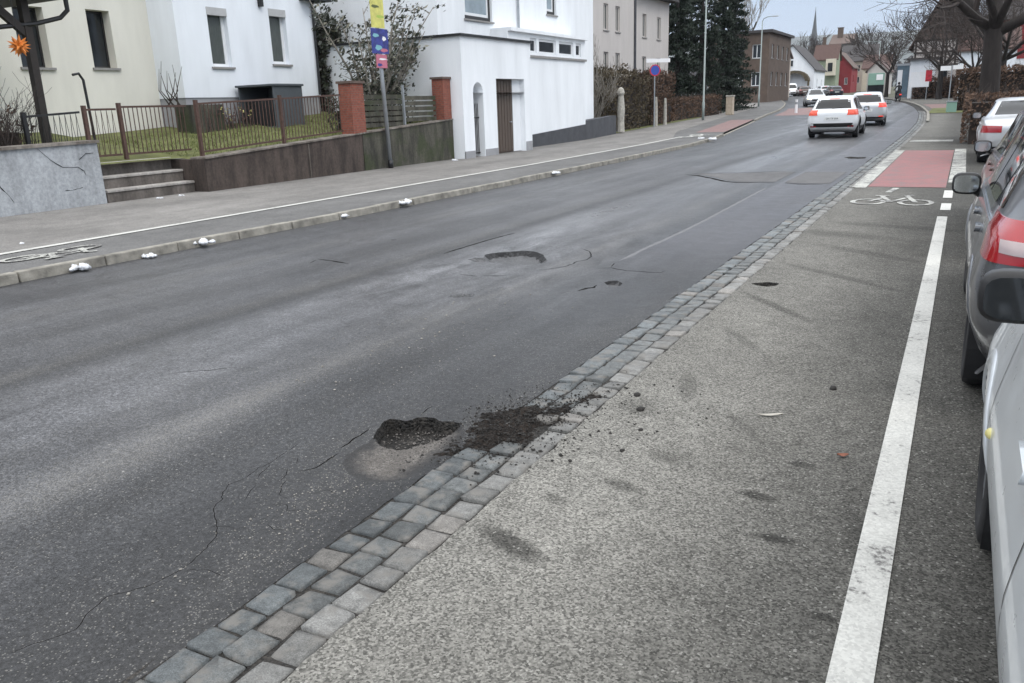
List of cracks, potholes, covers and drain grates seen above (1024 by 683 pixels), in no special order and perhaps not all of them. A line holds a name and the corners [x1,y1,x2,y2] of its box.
crack [9,429,369,654]
pothole [342,417,465,482]
pothole [468,251,548,265]
